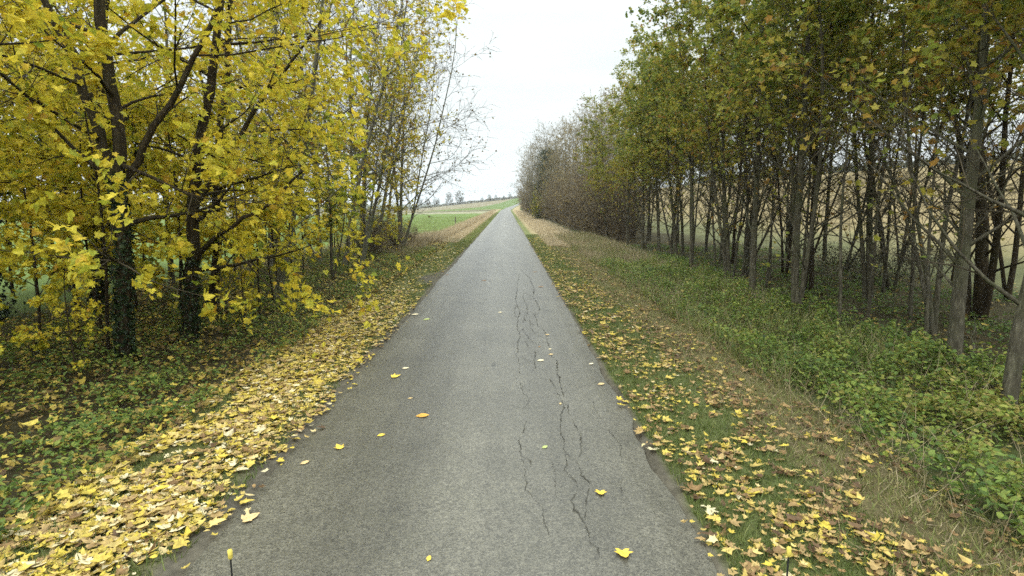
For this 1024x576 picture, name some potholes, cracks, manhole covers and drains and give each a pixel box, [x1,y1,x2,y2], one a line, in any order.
crack [515,269,599,552]
